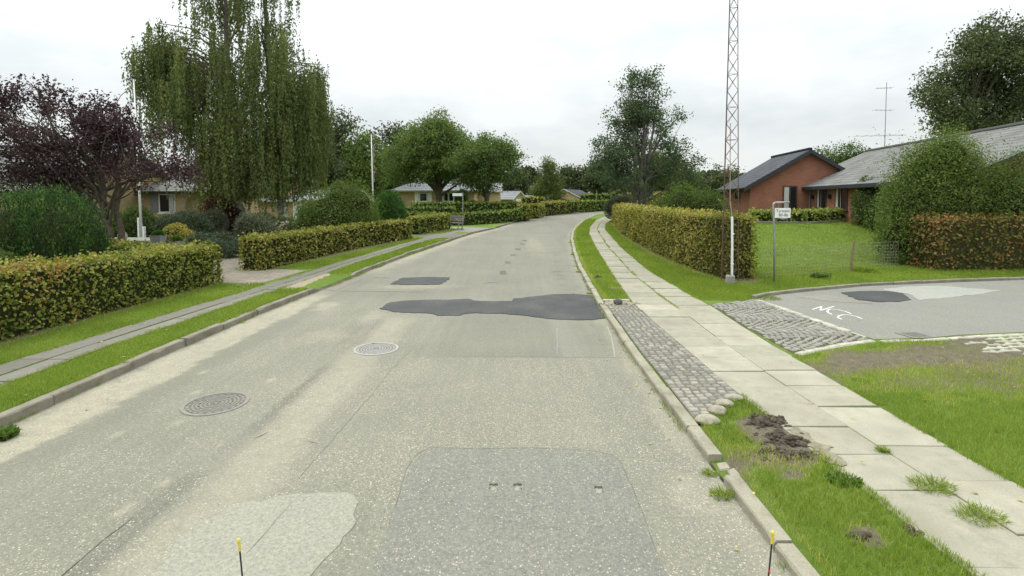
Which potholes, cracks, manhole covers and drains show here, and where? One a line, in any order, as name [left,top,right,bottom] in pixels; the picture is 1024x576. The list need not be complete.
manhole cover [353,342,399,356]
manhole cover [180,392,250,416]
